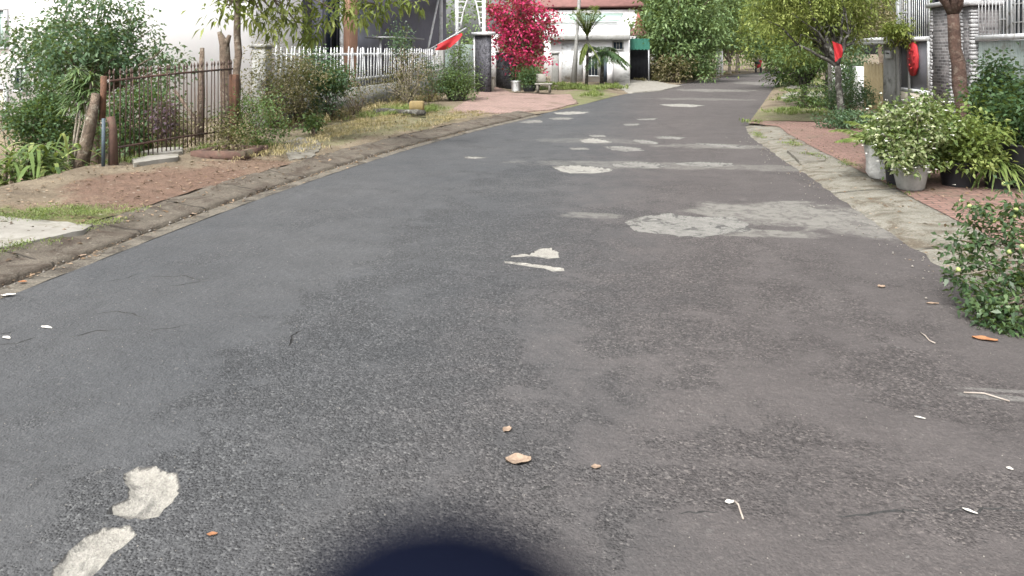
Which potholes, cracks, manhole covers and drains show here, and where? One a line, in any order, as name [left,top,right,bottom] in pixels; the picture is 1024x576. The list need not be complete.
crack [71,311,189,337]
crack [838,507,1024,517]
crack [103,273,209,286]
